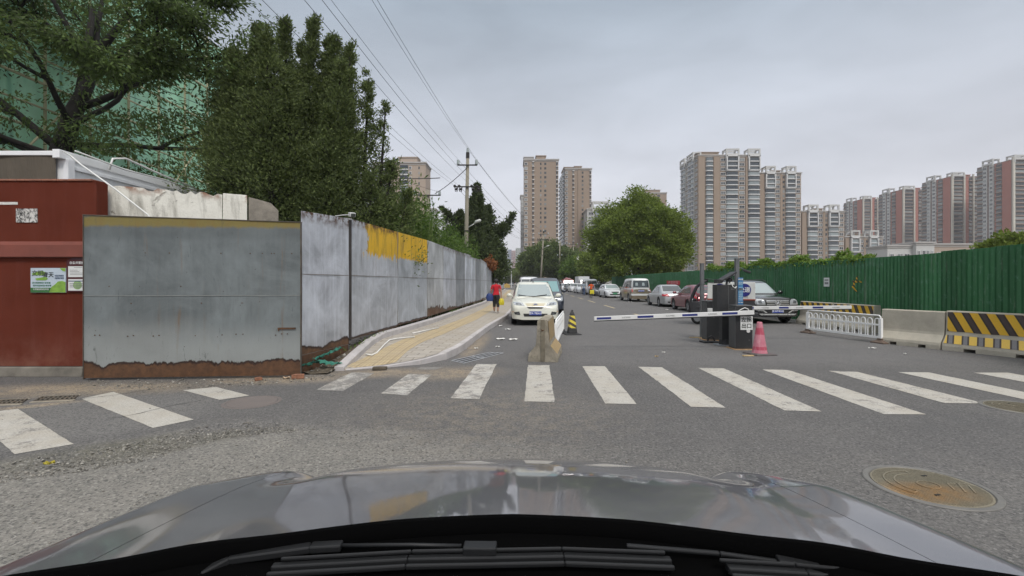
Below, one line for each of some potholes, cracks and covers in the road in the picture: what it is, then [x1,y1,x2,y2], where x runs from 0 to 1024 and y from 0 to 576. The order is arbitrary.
drain grate [0,398,31,406]
drain grate [29,394,81,403]
drain grate [451,352,503,363]
manhole cover [862,465,1006,512]
manhole cover [221,396,282,409]
manhole cover [977,400,1024,414]
